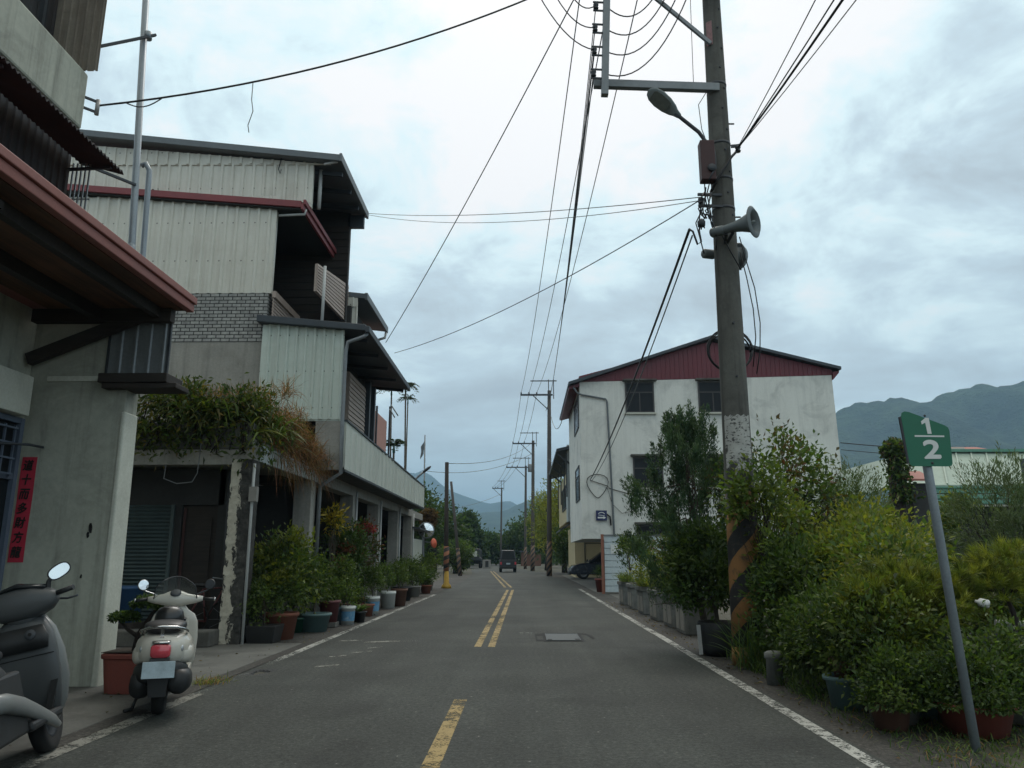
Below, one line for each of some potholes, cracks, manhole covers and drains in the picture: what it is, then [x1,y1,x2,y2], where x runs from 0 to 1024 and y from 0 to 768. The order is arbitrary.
manhole cover [535,633,585,642]
